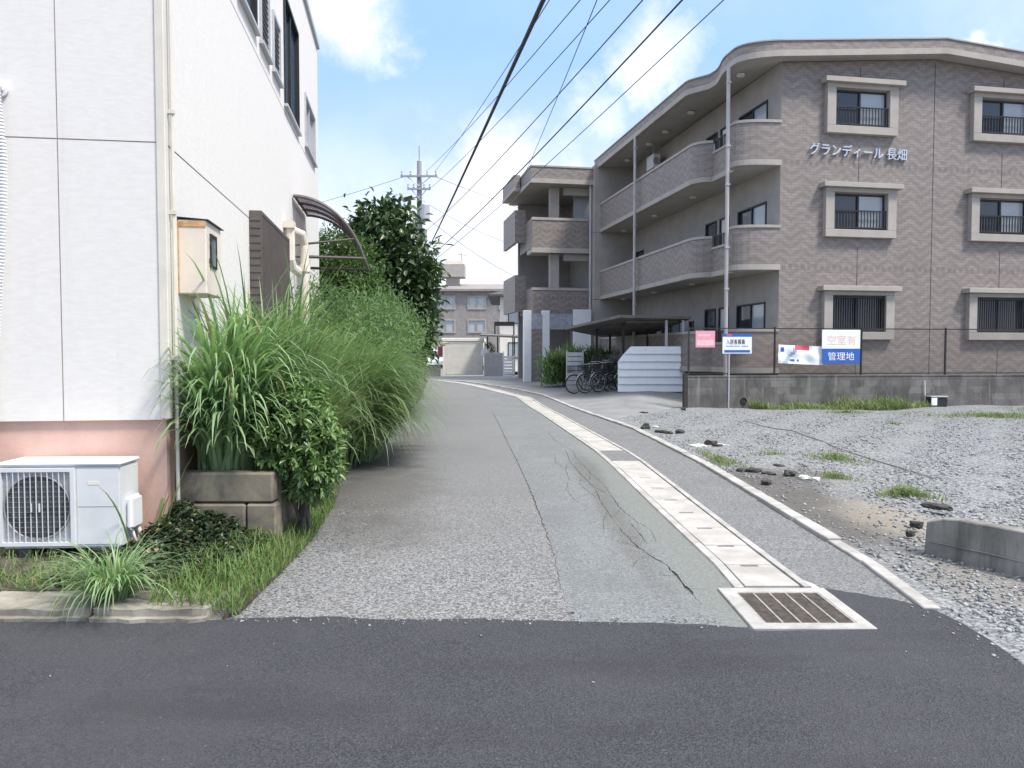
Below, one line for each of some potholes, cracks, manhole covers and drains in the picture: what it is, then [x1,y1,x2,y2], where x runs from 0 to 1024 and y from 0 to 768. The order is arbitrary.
crack [551,436,711,604]
crack [497,421,567,607]
drain grate [718,588,877,631]
